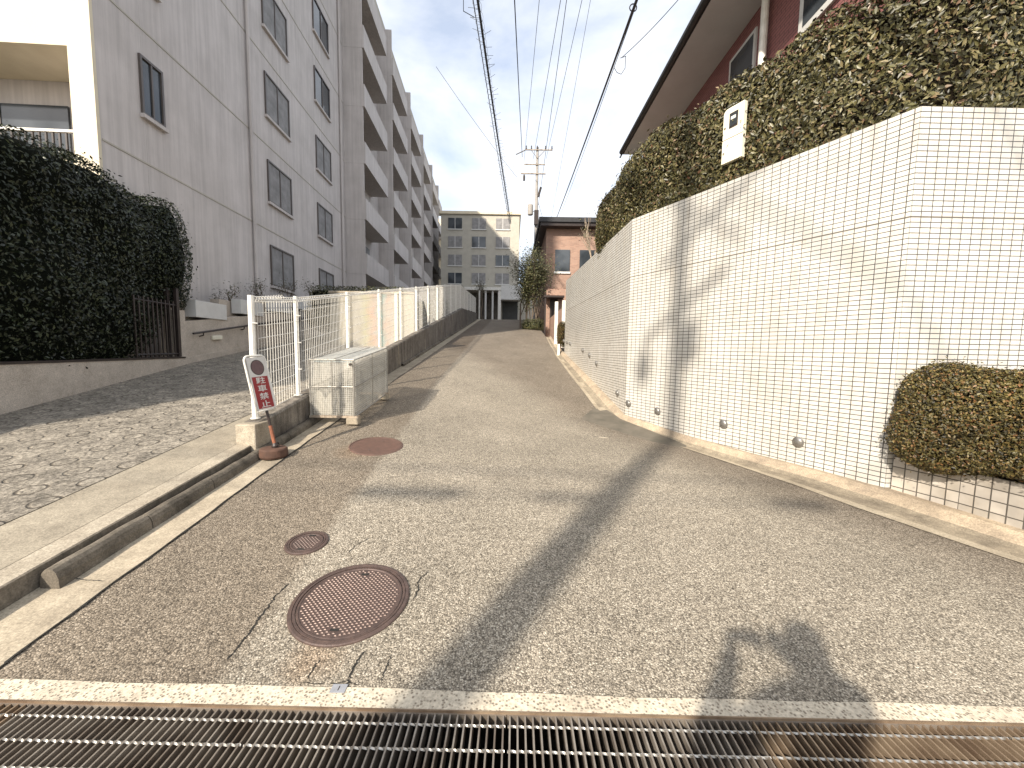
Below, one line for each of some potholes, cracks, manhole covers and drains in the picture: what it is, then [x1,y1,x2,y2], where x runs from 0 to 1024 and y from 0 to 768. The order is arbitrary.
manhole cover [348,437,403,456]
drain grate [0,703,30,727]
crack [301,651,392,687]
manhole cover [287,564,410,648]
drain grate [995,726,1024,751]
manhole cover [284,531,329,556]
crack [227,583,289,659]
drain grate [507,715,776,768]
drain grate [229,709,506,768]
